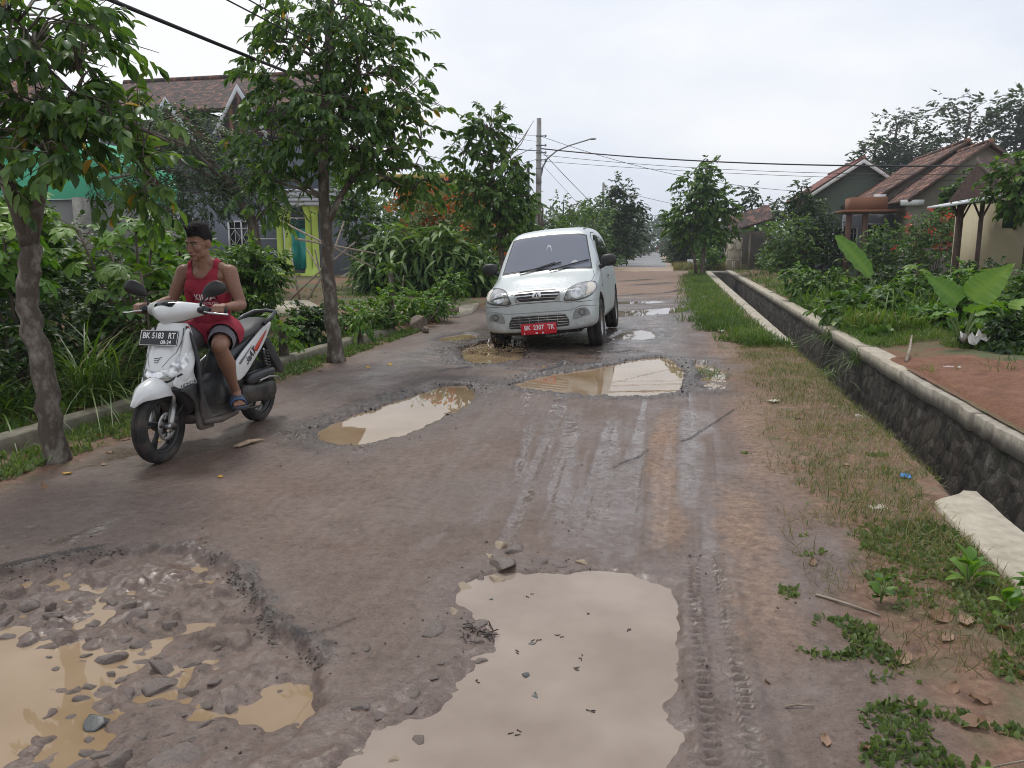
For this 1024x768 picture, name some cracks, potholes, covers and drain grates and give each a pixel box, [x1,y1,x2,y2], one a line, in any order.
pothole [504,354,697,397]
pothole [609,327,663,340]
pothole [289,380,498,446]
crack [680,407,737,442]
pothole [431,337,559,366]
pothole [688,358,739,390]
pothole [604,306,690,317]
pothole [0,541,336,768]
pothole [247,562,711,768]
